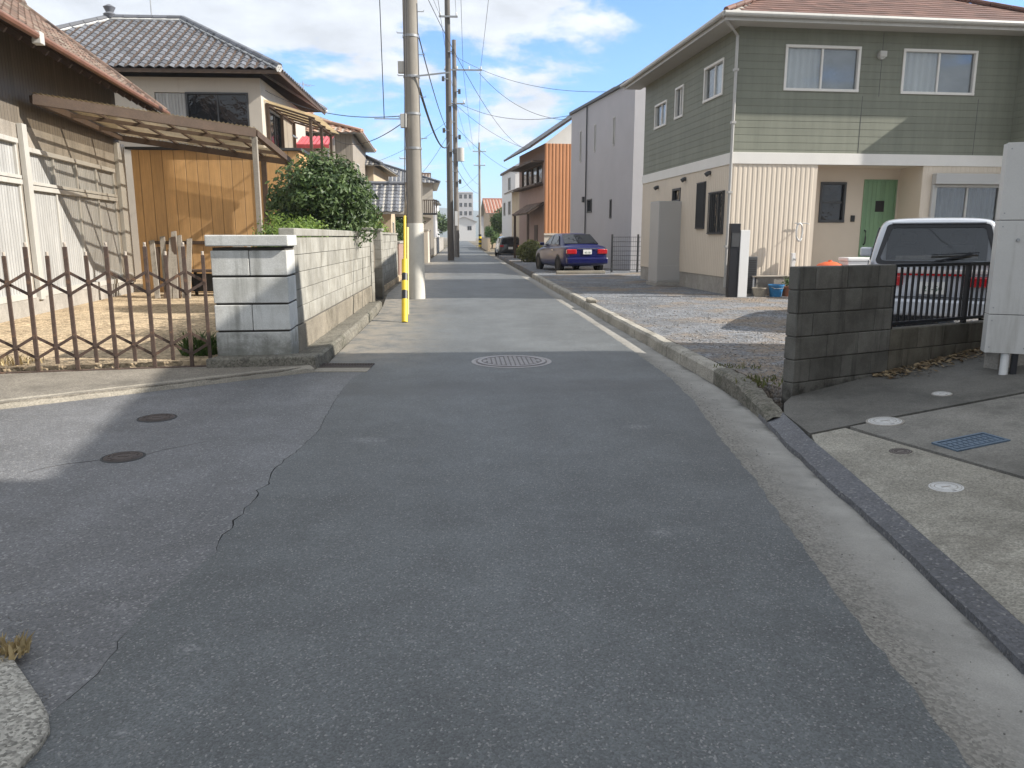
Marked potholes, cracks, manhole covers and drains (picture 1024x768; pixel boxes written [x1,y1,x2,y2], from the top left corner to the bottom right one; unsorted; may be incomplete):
crack [214,392,341,554]
manhole cover [100,451,146,463]
manhole cover [927,481,966,492]
manhole cover [866,416,905,426]
drain grate [312,363,375,372]
manhole cover [471,355,552,368]
manhole cover [136,413,177,423]
